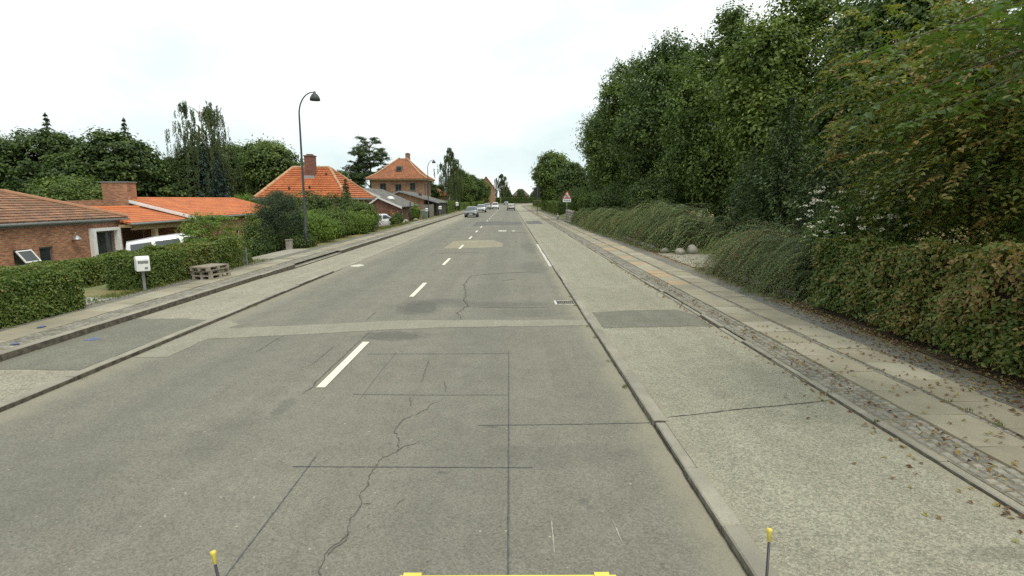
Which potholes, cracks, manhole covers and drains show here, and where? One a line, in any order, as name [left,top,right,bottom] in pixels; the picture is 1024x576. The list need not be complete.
crack [456,272,543,317]
crack [318,360,447,576]
